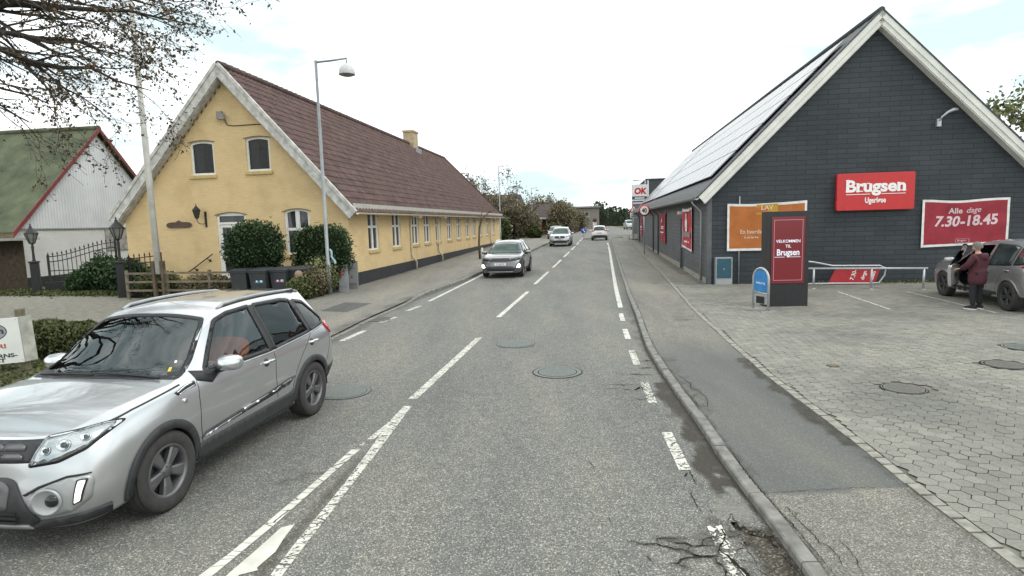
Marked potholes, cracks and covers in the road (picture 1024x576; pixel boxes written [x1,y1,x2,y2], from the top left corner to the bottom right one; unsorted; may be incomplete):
manhole cover [879,383,929,394]
manhole cover [497,340,535,348]
crack [609,367,658,400]
manhole cover [979,360,1024,370]
manhole cover [532,366,582,378]
crack [628,470,753,576]
crack [731,450,865,575]
manhole cover [324,385,371,400]
pothole [726,513,802,576]
